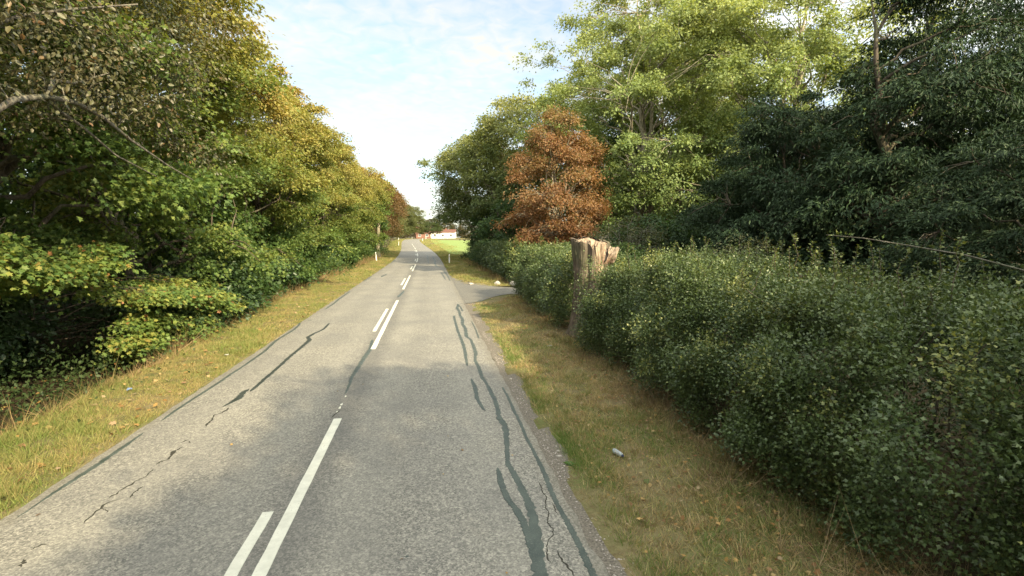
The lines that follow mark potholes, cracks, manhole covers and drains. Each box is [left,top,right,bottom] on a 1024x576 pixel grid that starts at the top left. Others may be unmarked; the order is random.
crack [18,408,229,567]
crack [539,483,574,576]
